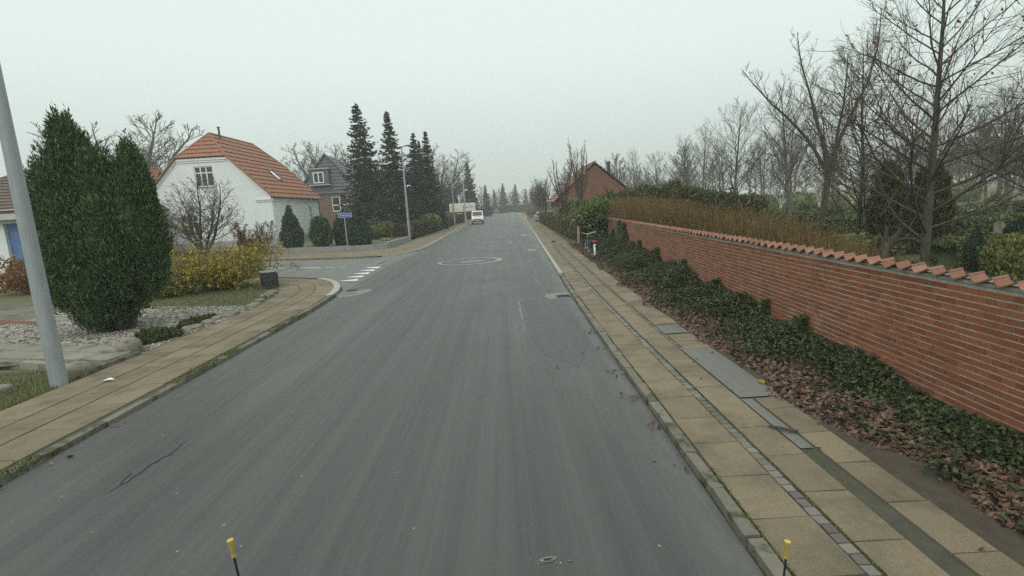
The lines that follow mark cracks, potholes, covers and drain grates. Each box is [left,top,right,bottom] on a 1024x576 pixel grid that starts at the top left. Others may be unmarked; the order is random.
crack [105,442,185,494]
